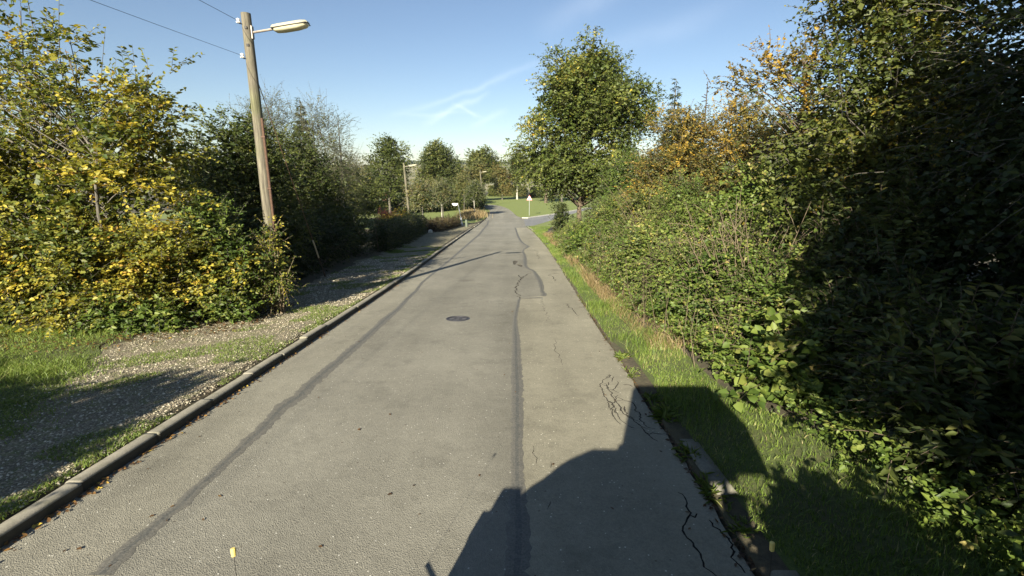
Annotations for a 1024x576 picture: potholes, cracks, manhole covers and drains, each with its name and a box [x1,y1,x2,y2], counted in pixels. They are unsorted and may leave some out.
crack [514,251,557,311]
crack [678,492,746,576]
crack [599,374,657,441]
